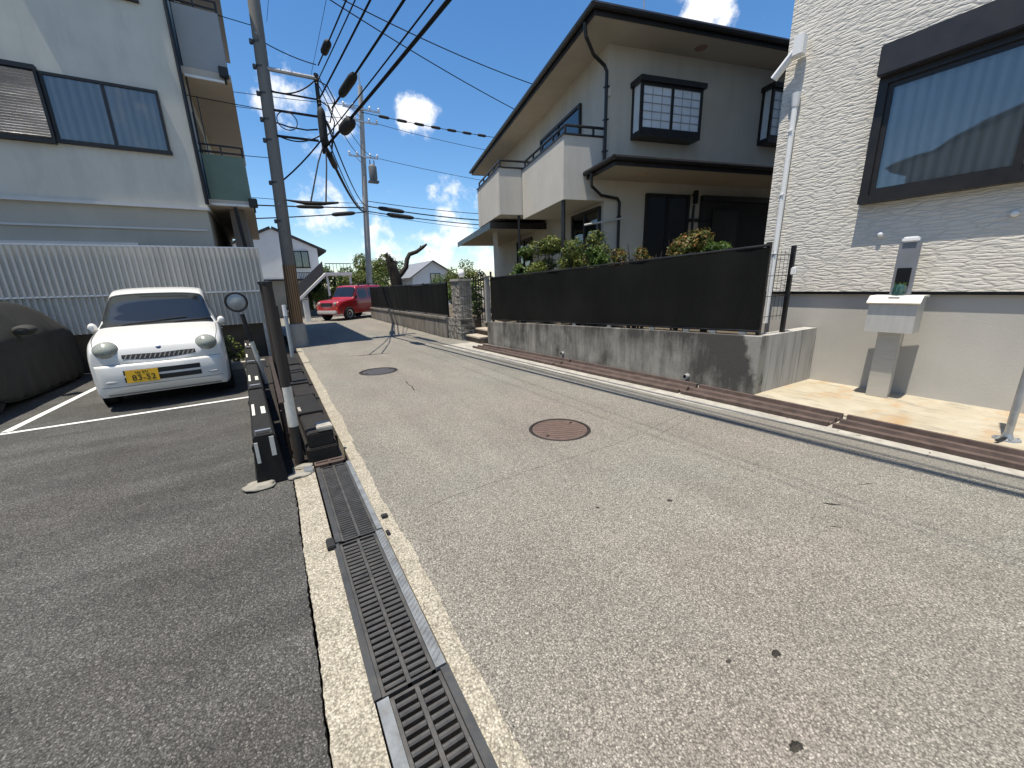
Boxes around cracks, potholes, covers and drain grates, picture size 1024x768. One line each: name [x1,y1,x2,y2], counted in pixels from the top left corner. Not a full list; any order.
drain grate [316,460,382,545]
manhole cover [529,419,591,441]
pothole [789,740,804,753]
manhole cover [359,367,398,376]
drain grate [334,529,446,706]
drain grate [377,664,498,768]
